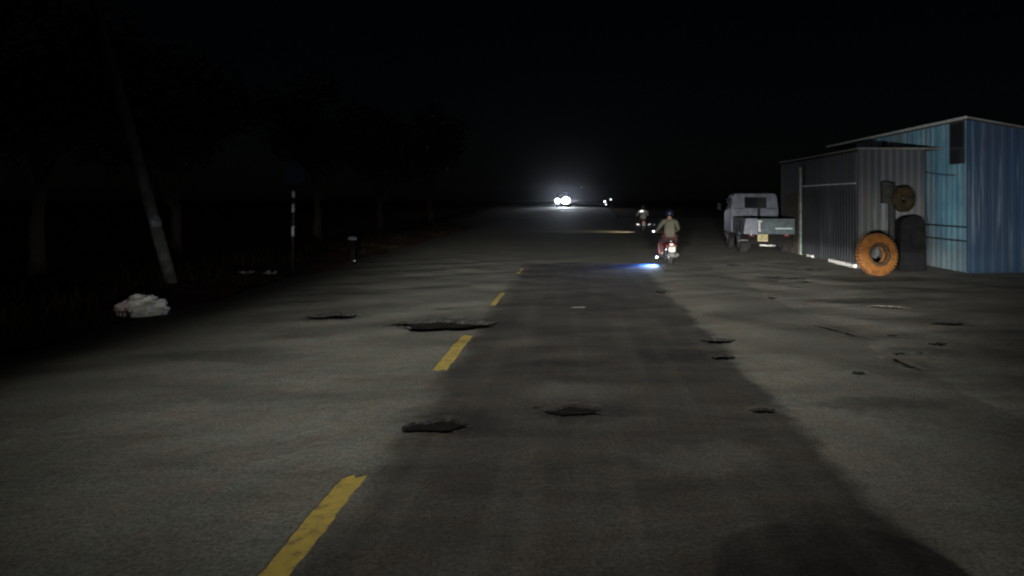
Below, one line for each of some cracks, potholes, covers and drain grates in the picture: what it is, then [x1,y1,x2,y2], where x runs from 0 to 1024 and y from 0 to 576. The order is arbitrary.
pothole [839,368,881,378]
pothole [701,351,747,362]
pothole [297,311,366,321]
pothole [385,414,484,439]
pothole [917,340,958,348]
pothole [526,400,618,421]
pothole [690,336,745,346]
pothole [734,403,792,418]
pothole [380,317,507,334]
crack [804,322,935,373]
